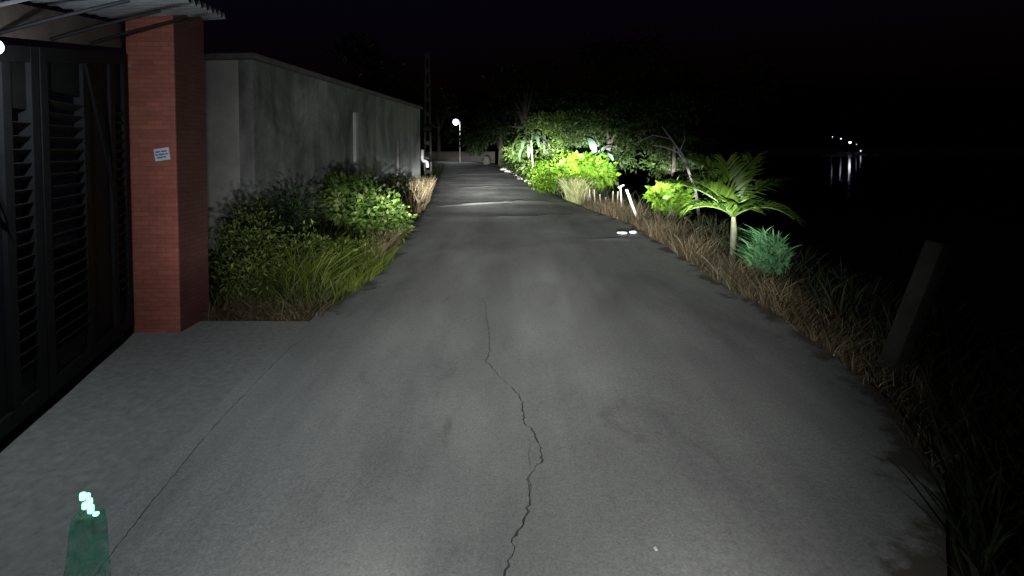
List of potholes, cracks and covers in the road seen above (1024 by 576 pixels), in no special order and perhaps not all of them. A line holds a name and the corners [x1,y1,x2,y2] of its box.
crack [484,301,544,576]
